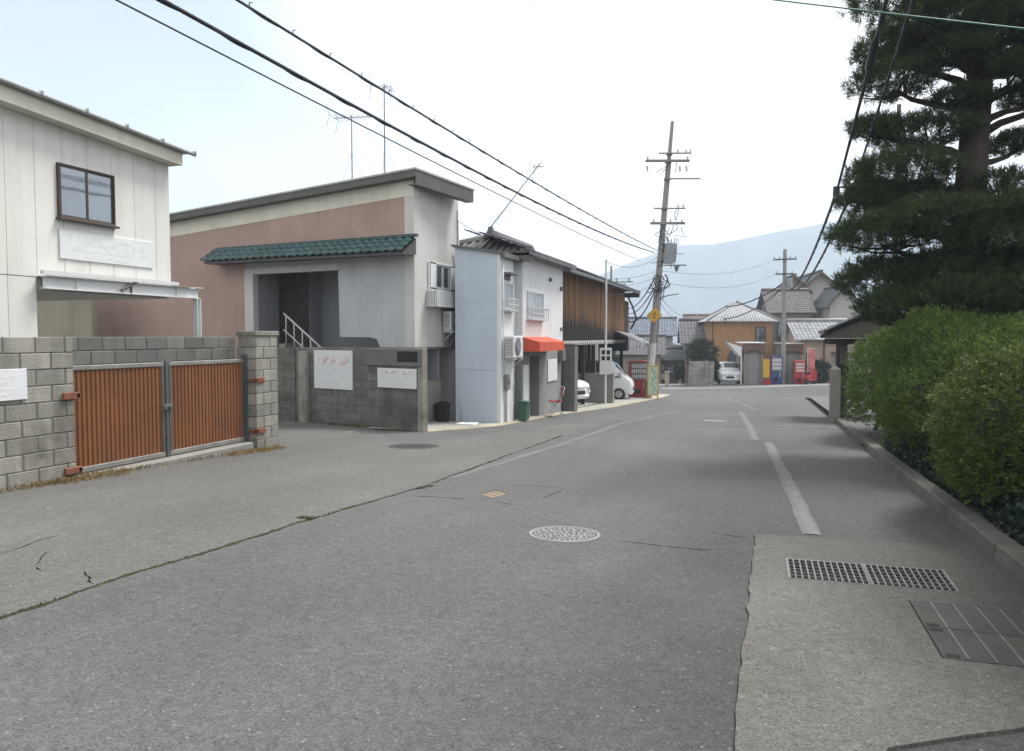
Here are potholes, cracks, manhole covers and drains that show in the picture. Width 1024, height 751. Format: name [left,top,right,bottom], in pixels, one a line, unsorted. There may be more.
manhole cover [529,526,601,542]
drain grate [785,558,960,592]
utility cover [480,490,508,498]
